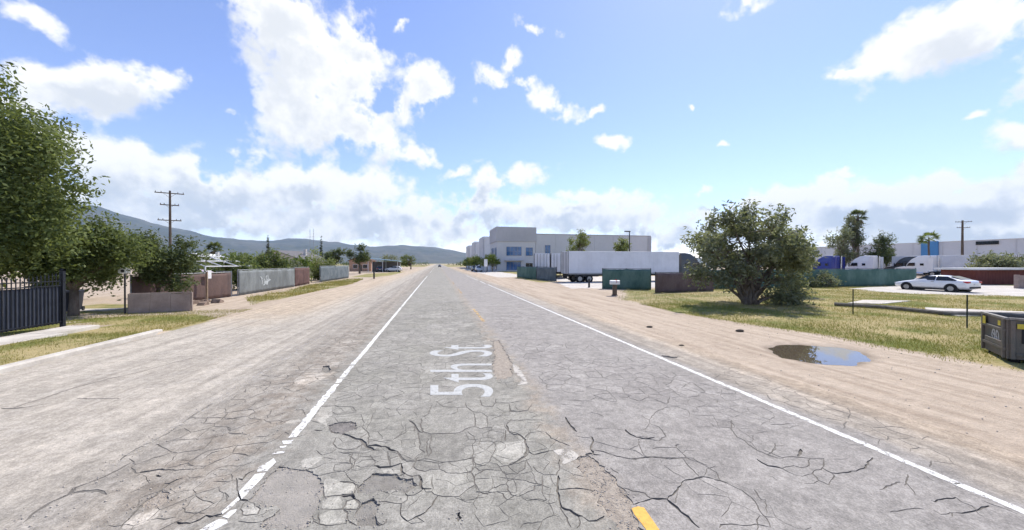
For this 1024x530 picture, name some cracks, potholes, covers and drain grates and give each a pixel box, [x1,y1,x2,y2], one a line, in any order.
crack [24,313,1017,530]
pothole [357,473,417,494]
pothole [328,421,357,434]
